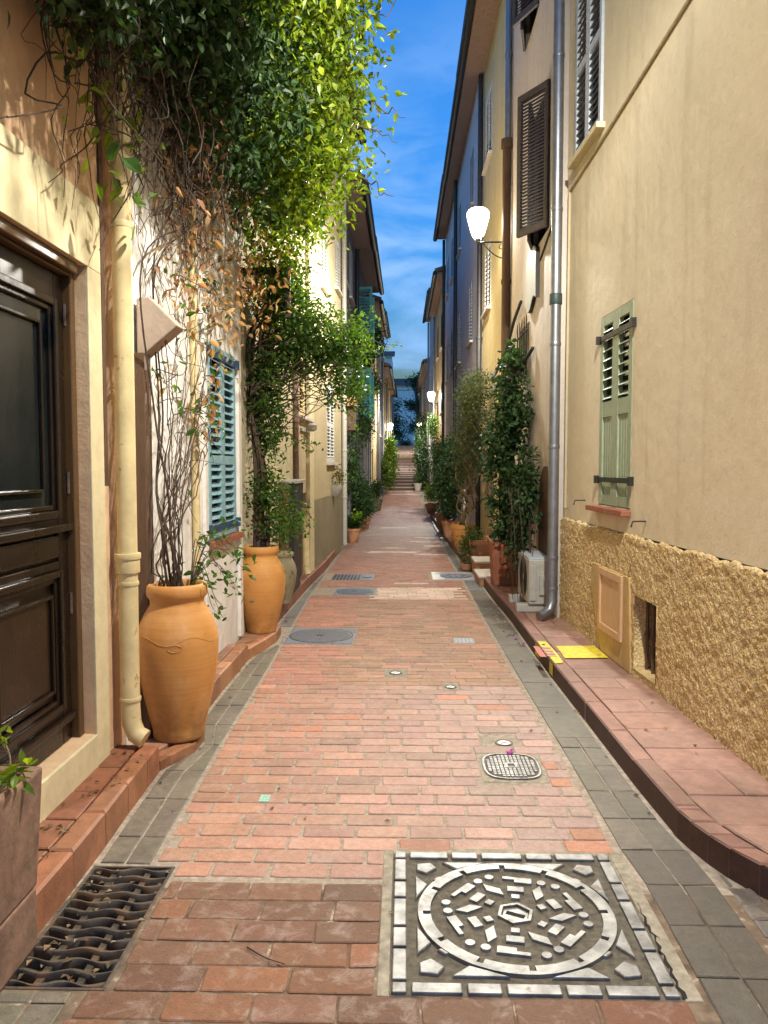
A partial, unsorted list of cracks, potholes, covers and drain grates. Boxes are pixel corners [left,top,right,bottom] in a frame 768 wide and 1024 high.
manhole cover [431,572,475,580]
crack [637,903,688,999]
manhole cover [376,848,704,1003]
drain grate [3,865,175,991]
manhole cover [282,628,357,644]
